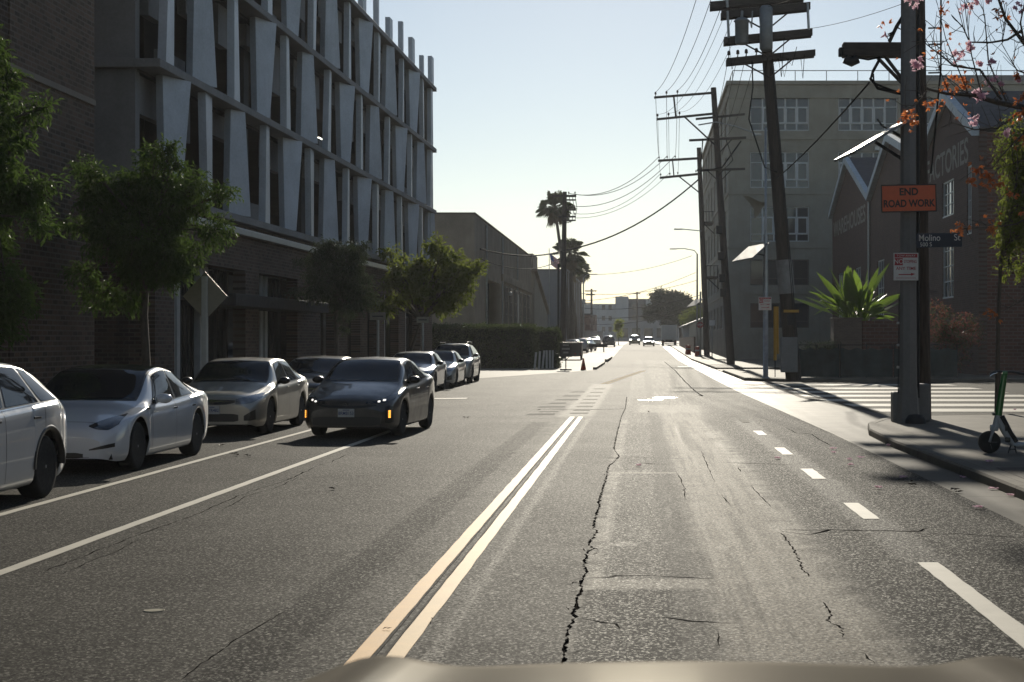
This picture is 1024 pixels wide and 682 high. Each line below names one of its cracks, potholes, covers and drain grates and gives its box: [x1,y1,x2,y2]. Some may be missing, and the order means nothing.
crack [560,397,714,663]
crack [823,602,845,638]
crack [778,527,1023,576]
crack [181,611,285,680]
